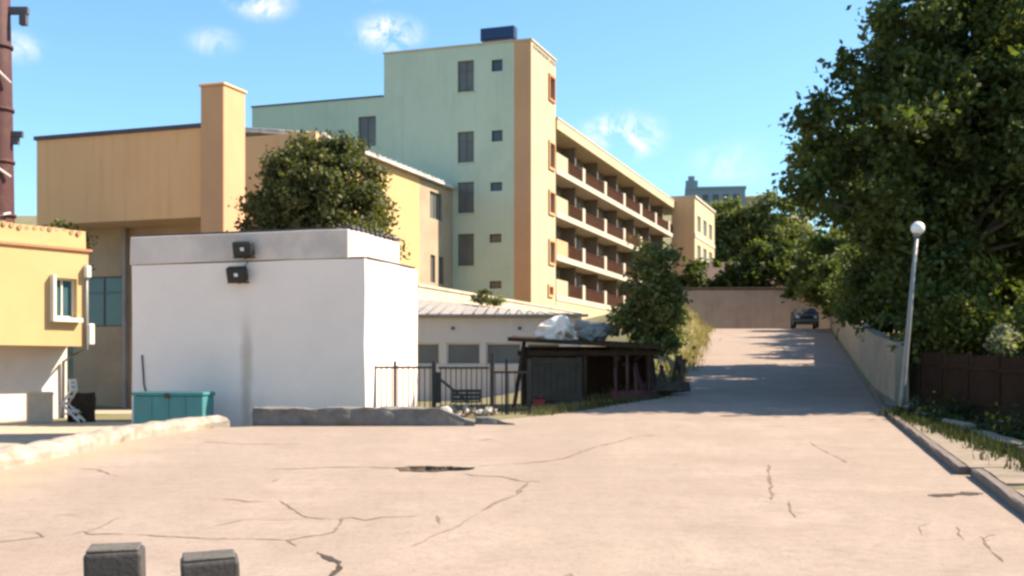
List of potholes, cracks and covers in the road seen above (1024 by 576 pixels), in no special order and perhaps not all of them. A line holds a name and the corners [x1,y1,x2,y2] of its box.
crack [956,526,1003,561]
crack [767,465,796,518]
crack [67,435,653,576]
